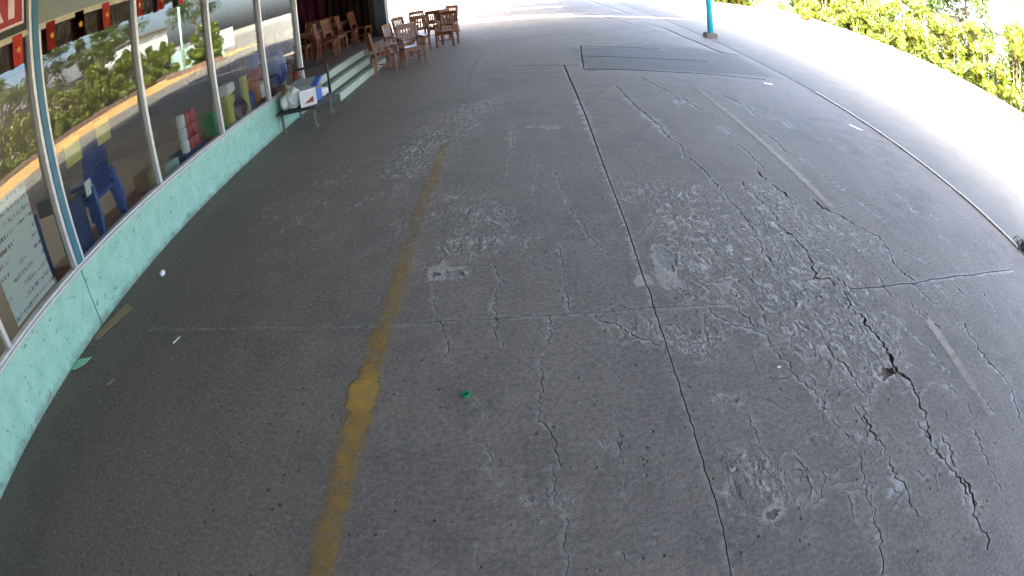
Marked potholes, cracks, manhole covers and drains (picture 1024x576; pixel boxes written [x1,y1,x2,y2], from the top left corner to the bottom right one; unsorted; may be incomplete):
crack [432,289,460,380]
pothole [877,367,896,381]
pothole [441,268,466,279]
crack [595,76,1023,574]
crack [537,316,570,576]
